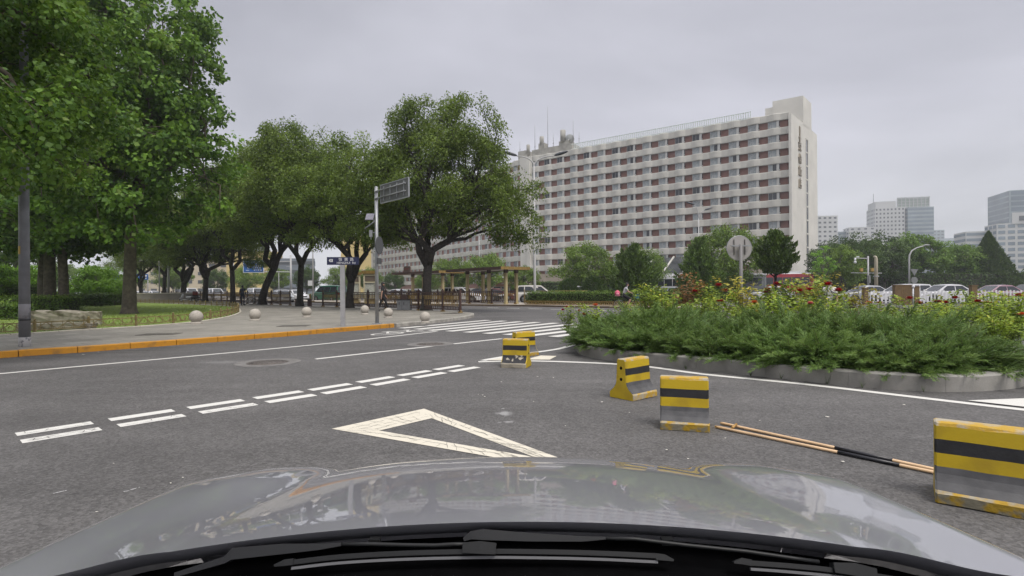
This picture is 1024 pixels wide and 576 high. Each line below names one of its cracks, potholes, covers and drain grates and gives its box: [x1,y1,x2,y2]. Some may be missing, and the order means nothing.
manhole cover [234,358,301,367]
